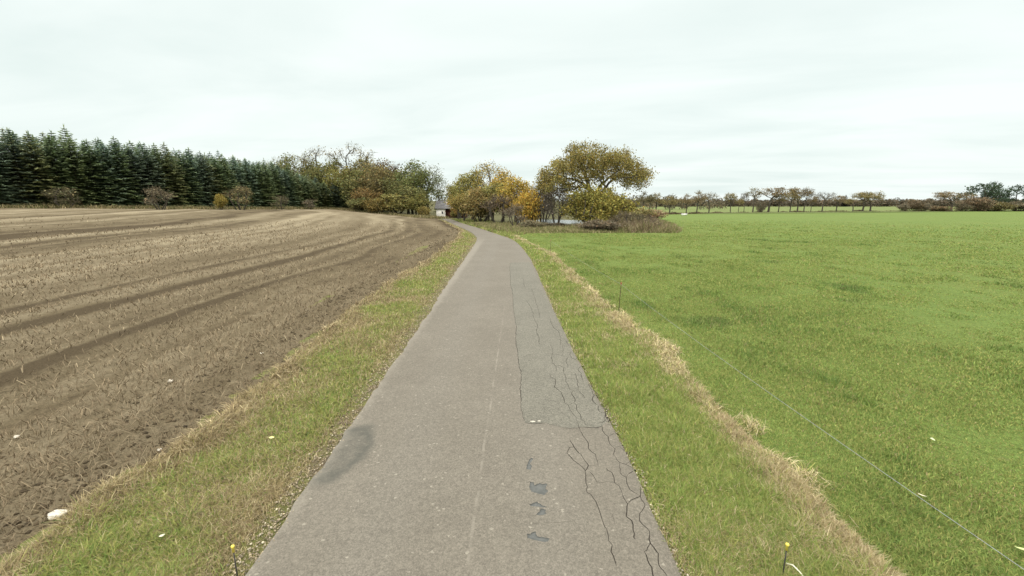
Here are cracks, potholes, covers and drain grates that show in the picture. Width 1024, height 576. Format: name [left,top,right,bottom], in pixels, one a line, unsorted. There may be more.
crack [510,281,666,576]
